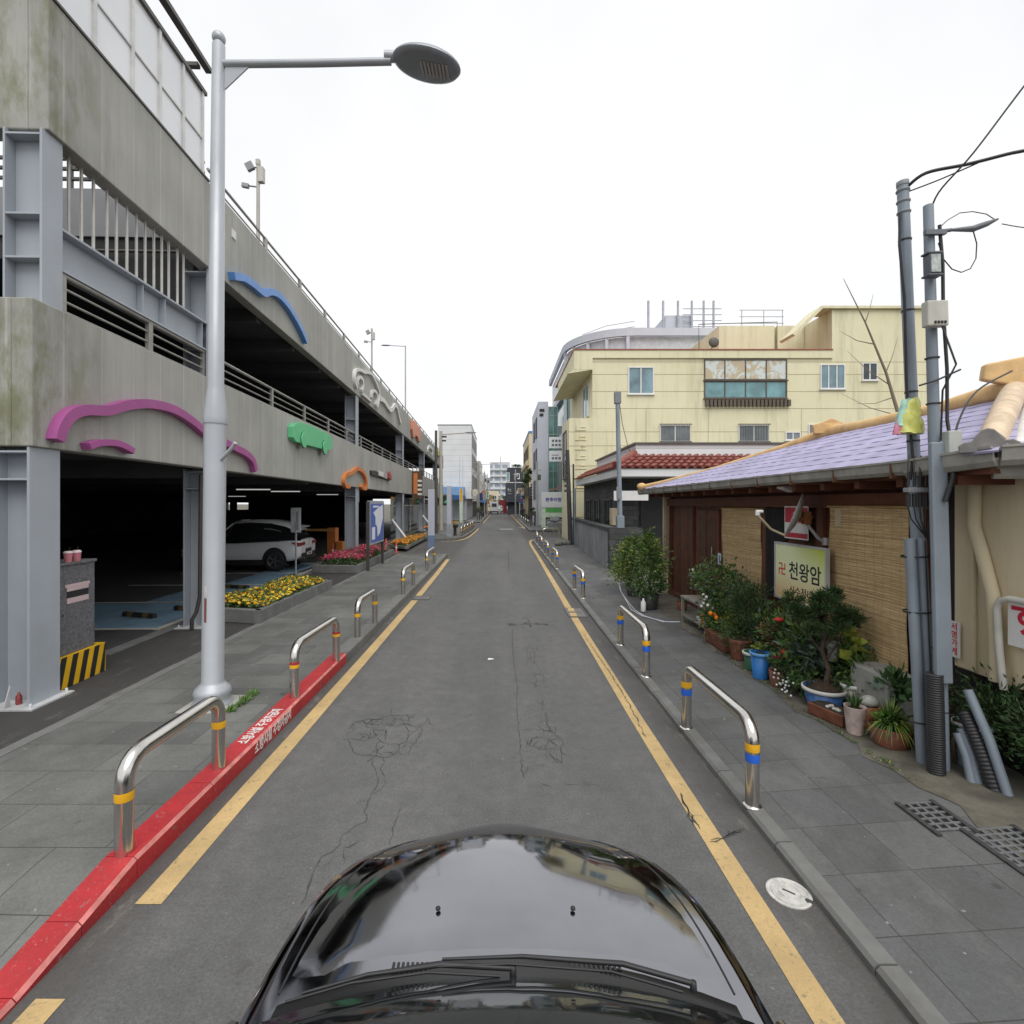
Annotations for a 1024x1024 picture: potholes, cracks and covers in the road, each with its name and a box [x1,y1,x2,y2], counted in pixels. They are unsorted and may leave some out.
crack [585,637,646,737]
drain grate [895,799,980,837]
drain grate [959,824,1024,876]
crack [301,710,431,904]
manhole cover [766,877,813,910]
crack [507,618,565,787]
